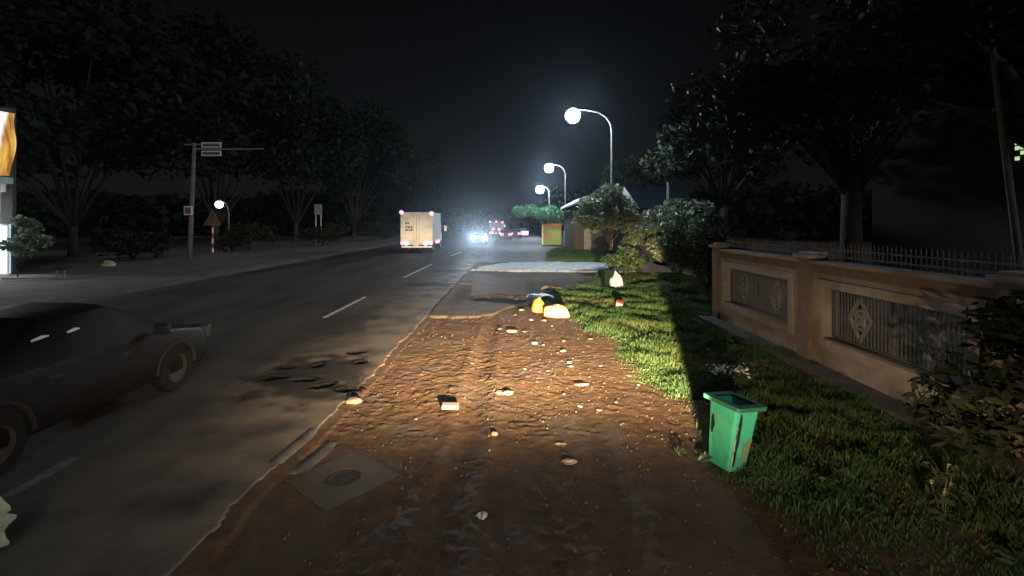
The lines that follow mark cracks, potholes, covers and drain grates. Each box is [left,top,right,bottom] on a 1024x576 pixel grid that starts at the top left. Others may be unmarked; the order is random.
manhole cover [285,451,400,512]
pothole [255,373,293,382]
pothole [305,381,339,390]
pothole [465,293,534,307]
